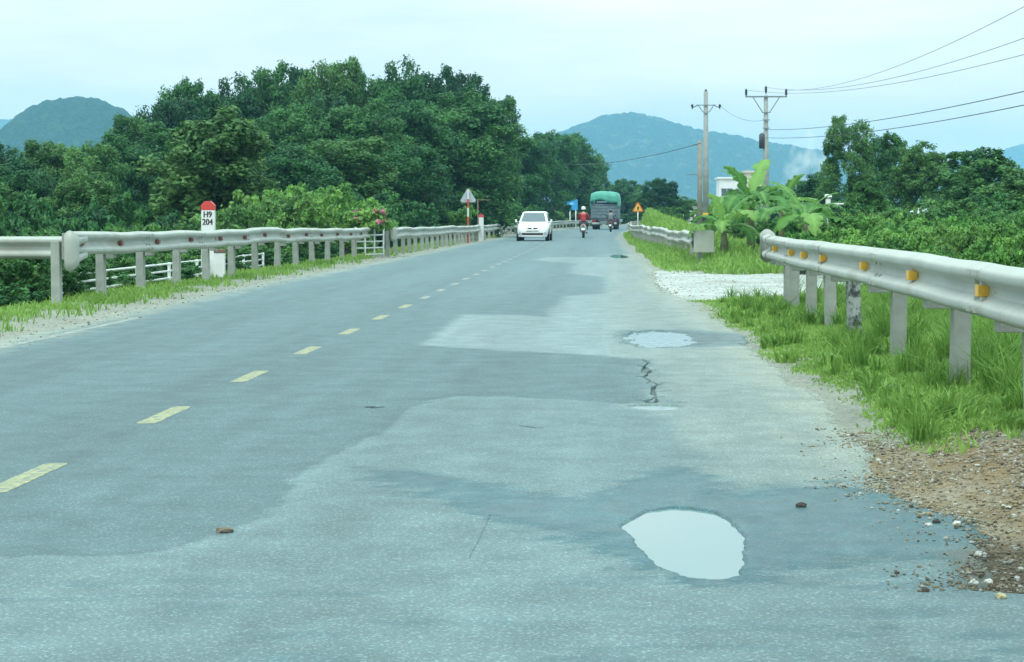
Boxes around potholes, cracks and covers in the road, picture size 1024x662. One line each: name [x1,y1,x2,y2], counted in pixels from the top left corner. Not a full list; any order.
pothole [610,330,743,348]
pothole [612,505,759,581]
crack [466,514,493,559]
crack [634,358,672,403]
